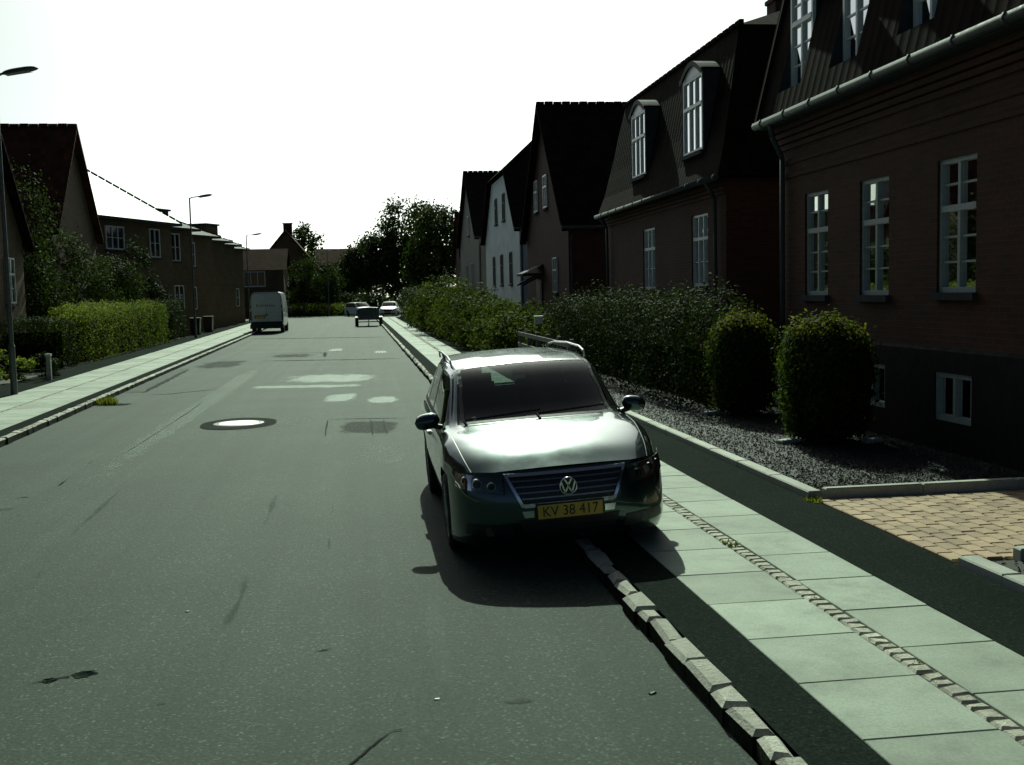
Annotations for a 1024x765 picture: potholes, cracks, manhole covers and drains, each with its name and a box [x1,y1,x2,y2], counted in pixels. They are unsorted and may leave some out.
crack [348,729,401,765]
